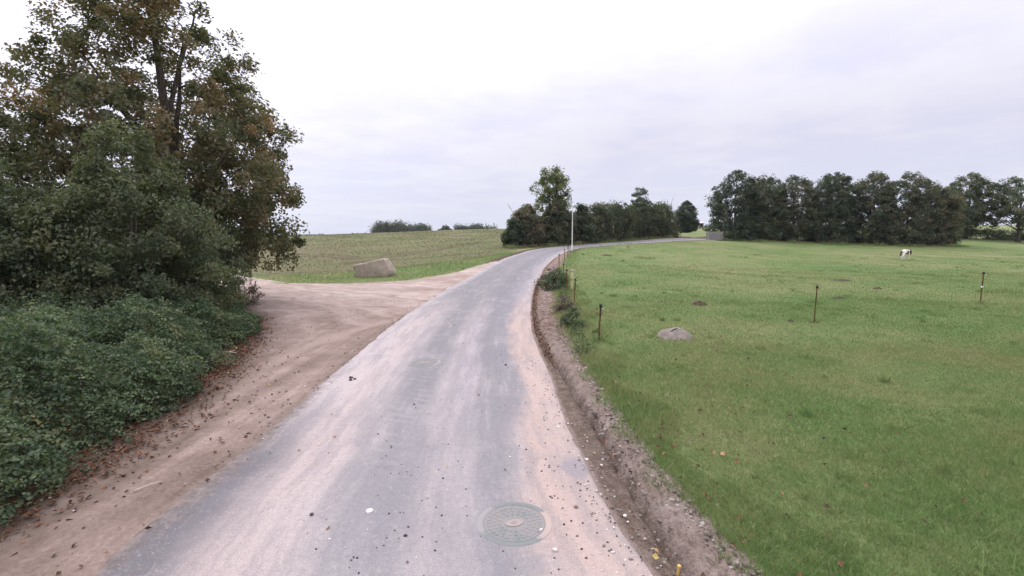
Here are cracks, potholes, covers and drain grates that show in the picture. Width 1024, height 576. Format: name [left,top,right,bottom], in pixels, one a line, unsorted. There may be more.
manhole cover [476,502,552,547]
manhole cover [407,358,441,367]
